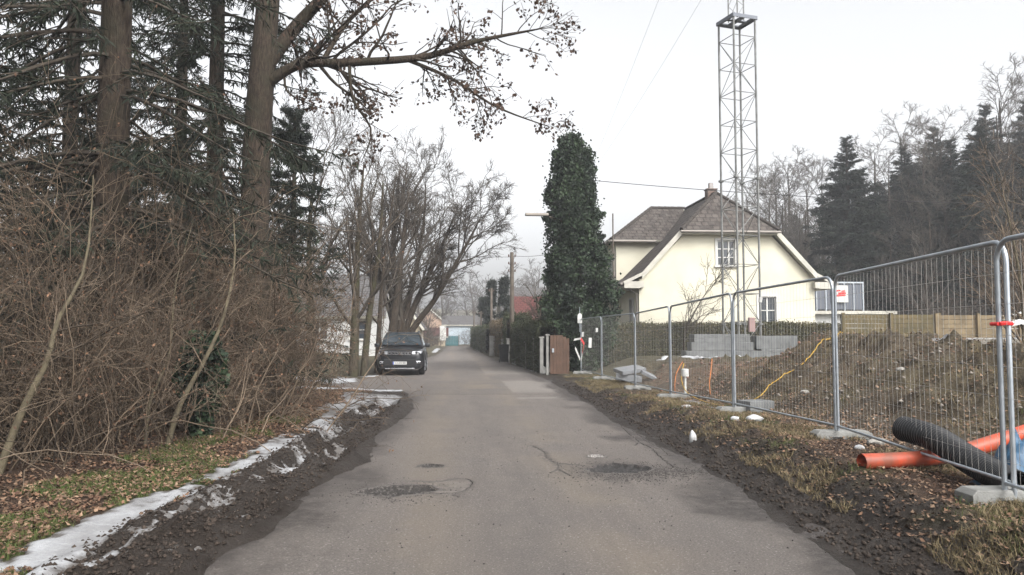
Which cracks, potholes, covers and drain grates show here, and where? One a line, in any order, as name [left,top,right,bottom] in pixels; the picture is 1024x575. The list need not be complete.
pothole [351,484,442,498]
pothole [582,463,654,474]
crack [619,425,699,477]
crack [532,445,584,475]
